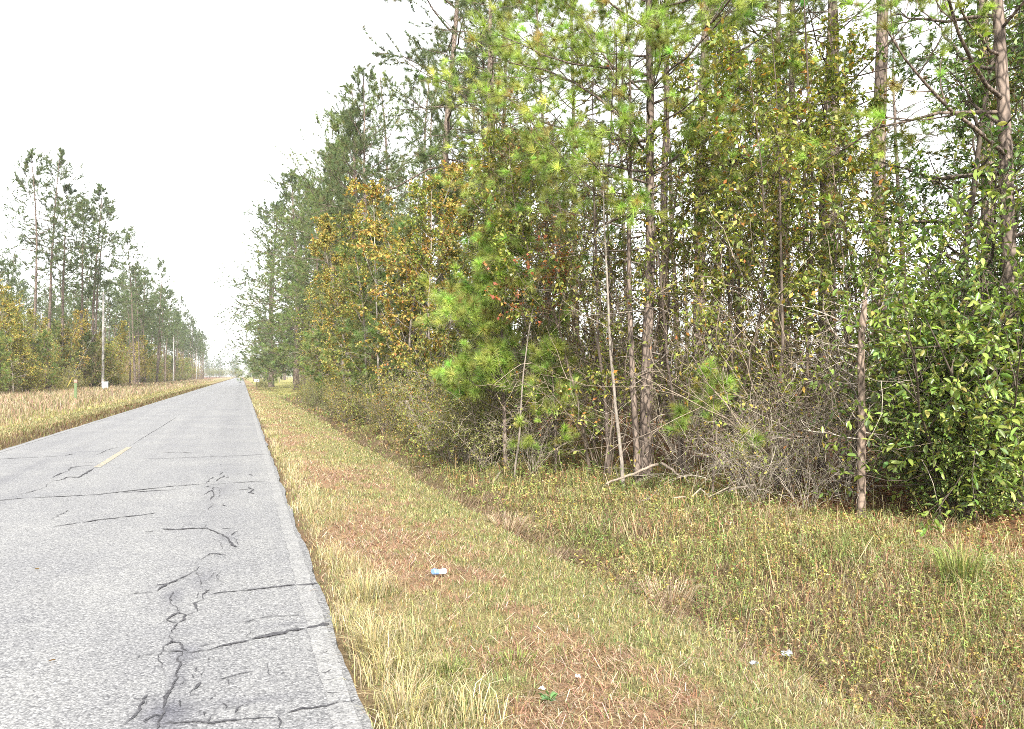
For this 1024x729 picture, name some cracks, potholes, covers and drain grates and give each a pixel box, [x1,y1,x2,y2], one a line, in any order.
crack [4,448,355,729]
